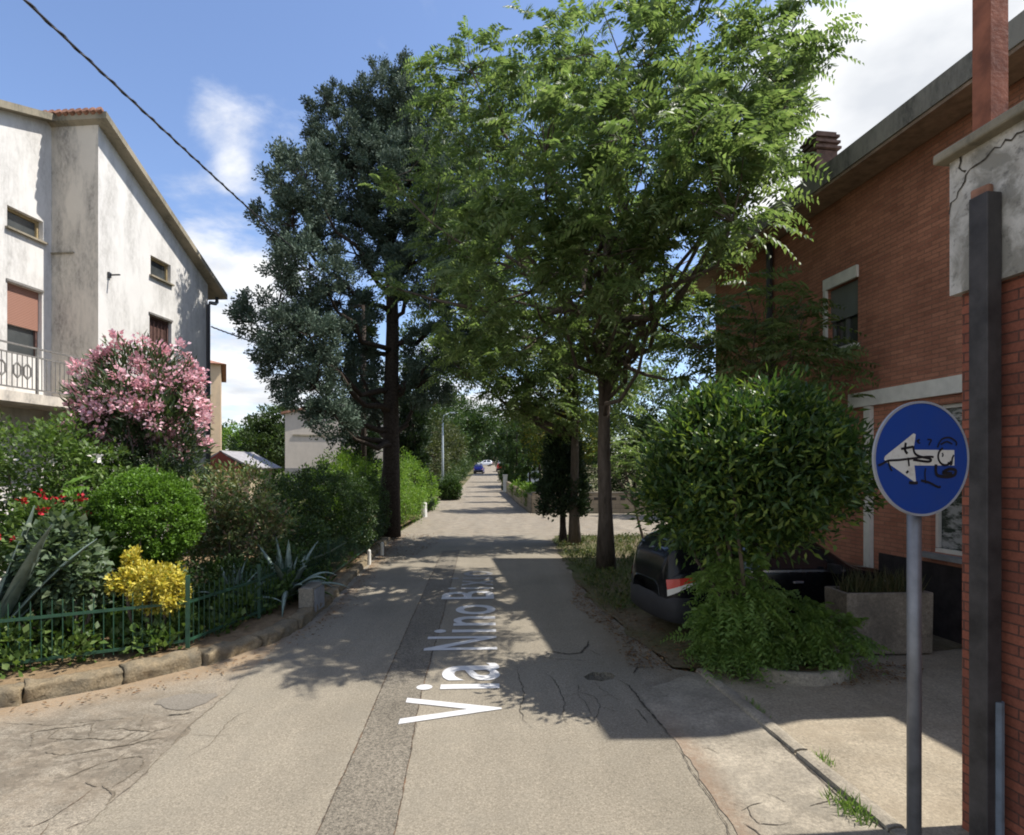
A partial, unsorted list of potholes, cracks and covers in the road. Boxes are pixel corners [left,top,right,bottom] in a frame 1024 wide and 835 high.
crack [5,681,253,835]
pothole [584,672,616,681]
crack [736,793,789,835]
crack [540,641,617,723]
